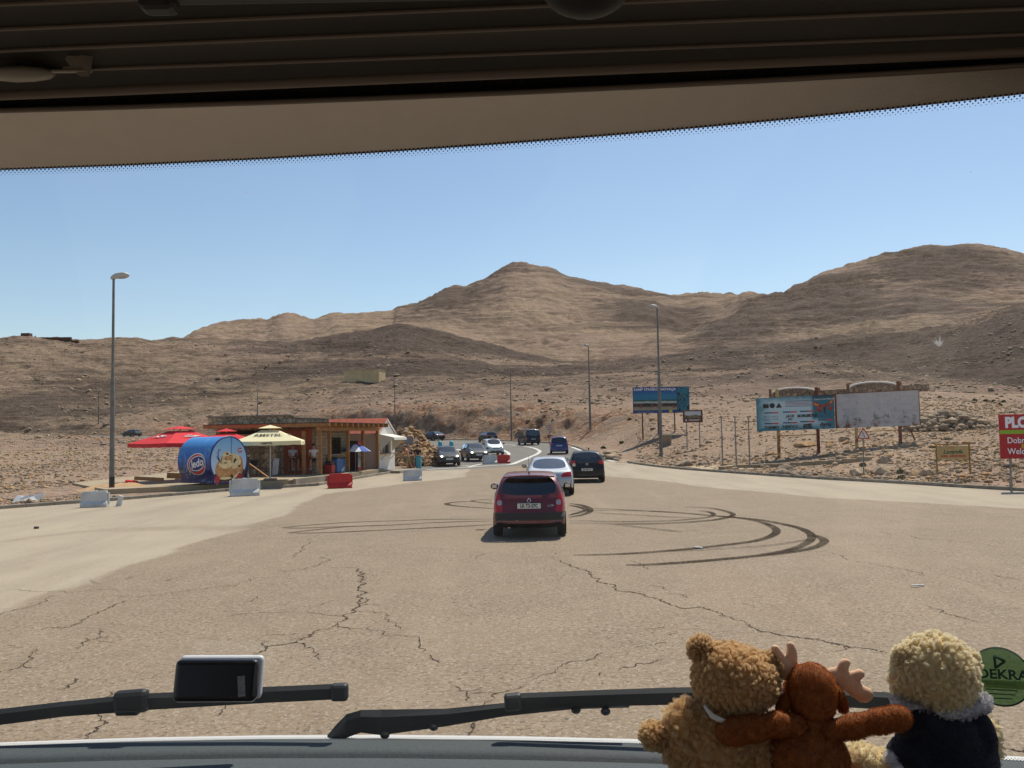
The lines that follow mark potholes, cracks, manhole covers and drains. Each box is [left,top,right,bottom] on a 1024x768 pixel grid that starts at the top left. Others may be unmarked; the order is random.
crack [553,554,884,652]
crack [0,536,439,663]
crack [85,691,113,739]
crack [456,627,674,736]
